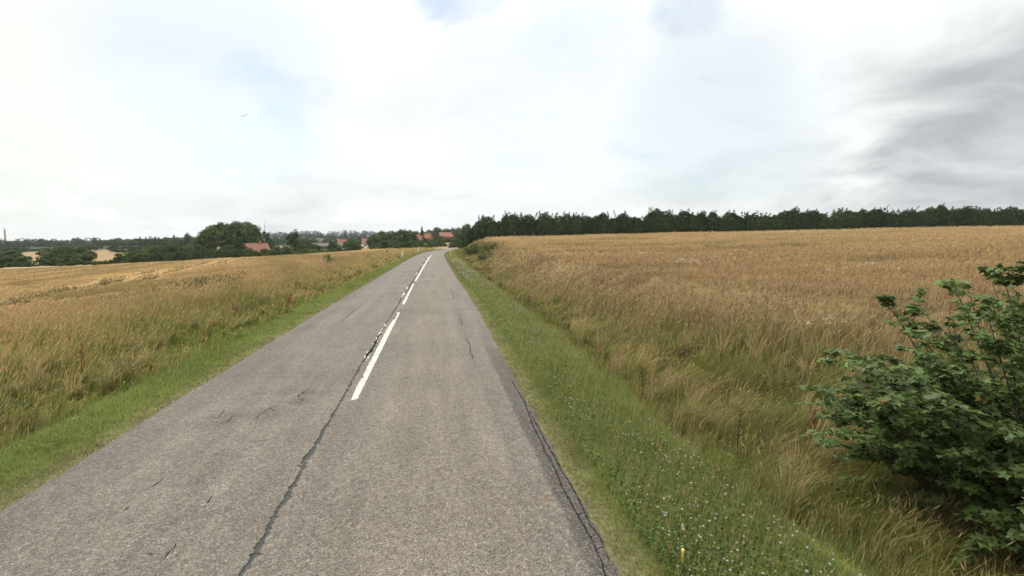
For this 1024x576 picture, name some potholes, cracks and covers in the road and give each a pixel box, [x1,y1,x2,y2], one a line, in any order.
crack [512,381,610,576]
